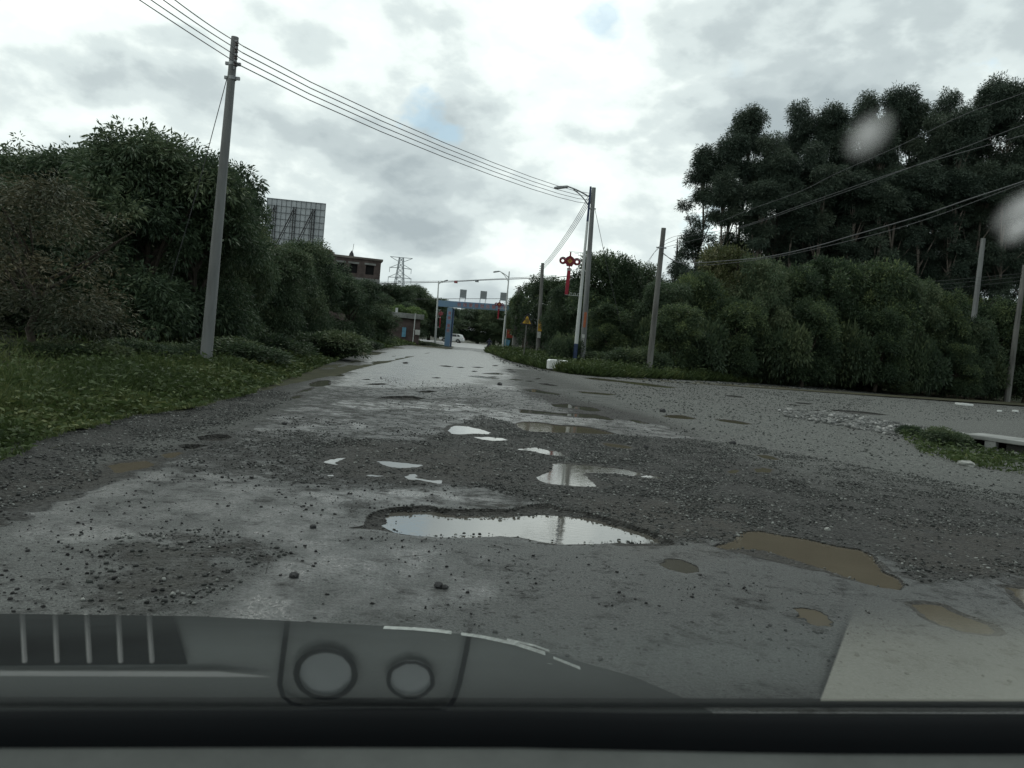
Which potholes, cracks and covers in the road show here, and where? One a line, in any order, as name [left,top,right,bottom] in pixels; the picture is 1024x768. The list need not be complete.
pothole [515,422,616,434]
pothole [659,558,699,574]
pothole [350,504,675,546]
pothole [792,607,834,627]
pothole [712,530,905,590]
